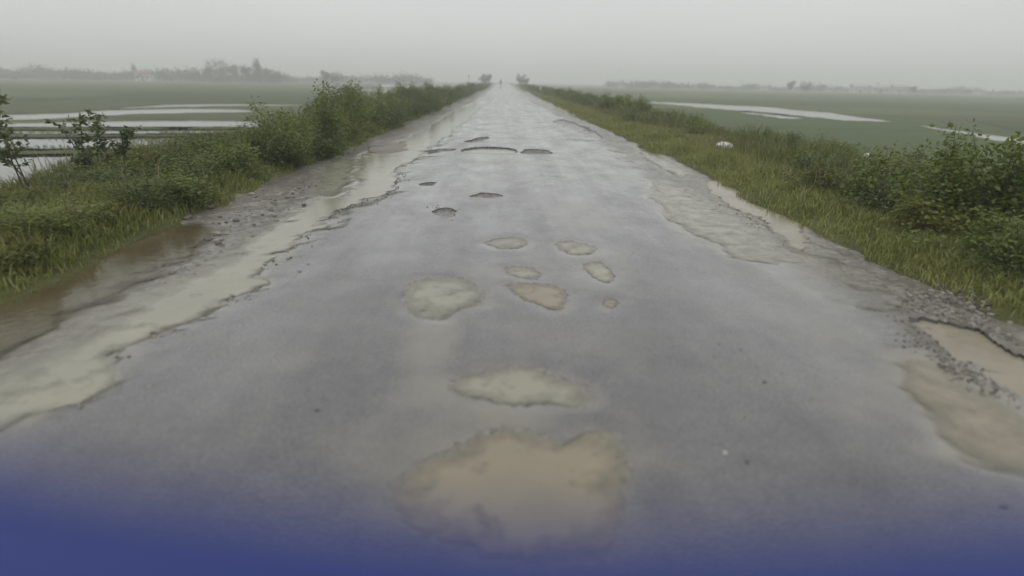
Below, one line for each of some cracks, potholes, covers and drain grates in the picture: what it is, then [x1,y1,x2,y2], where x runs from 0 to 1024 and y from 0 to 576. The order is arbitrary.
pothole [505,282,570,311]
pothole [602,298,619,309]
pothole [447,364,600,409]
pothole [908,316,1024,397]
pothole [483,237,529,250]
pothole [554,240,597,256]
pothole [432,207,457,217]
pothole [503,266,543,280]
pothole [380,424,634,533]
pothole [400,275,487,321]
pothole [582,261,616,283]
